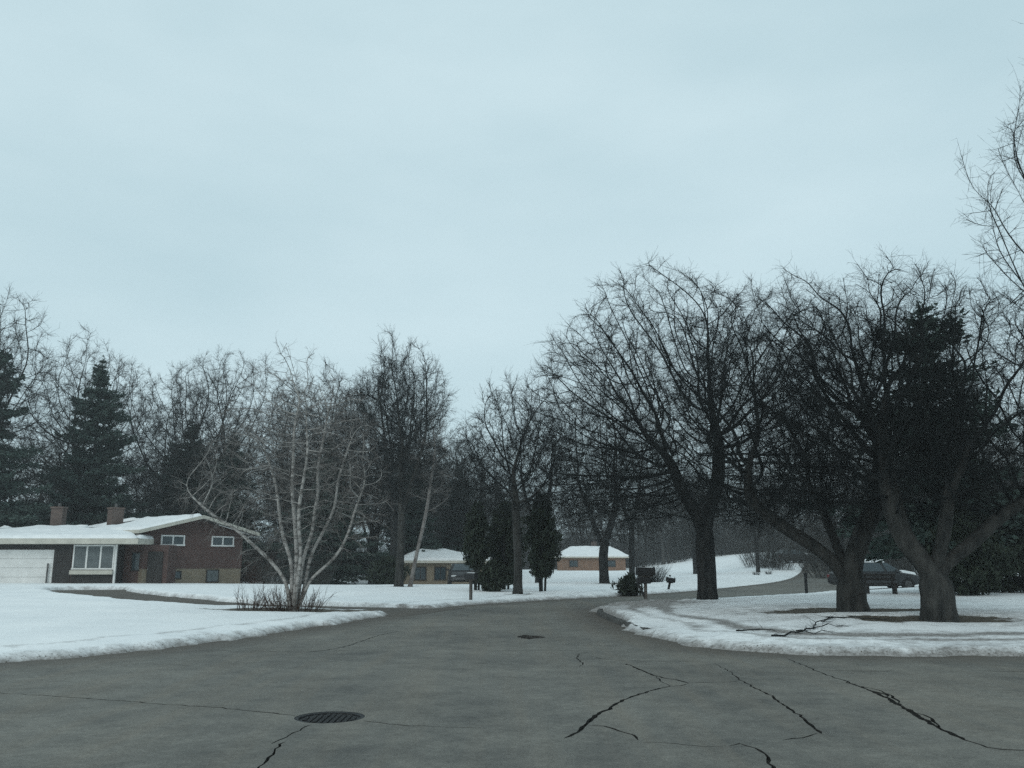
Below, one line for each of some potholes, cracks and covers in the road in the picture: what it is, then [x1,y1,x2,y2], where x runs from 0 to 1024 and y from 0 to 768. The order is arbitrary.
manhole cover [294,711,365,723]
crack [789,659,1024,751]
crack [565,652,822,768]
crack [2,693,309,768]
